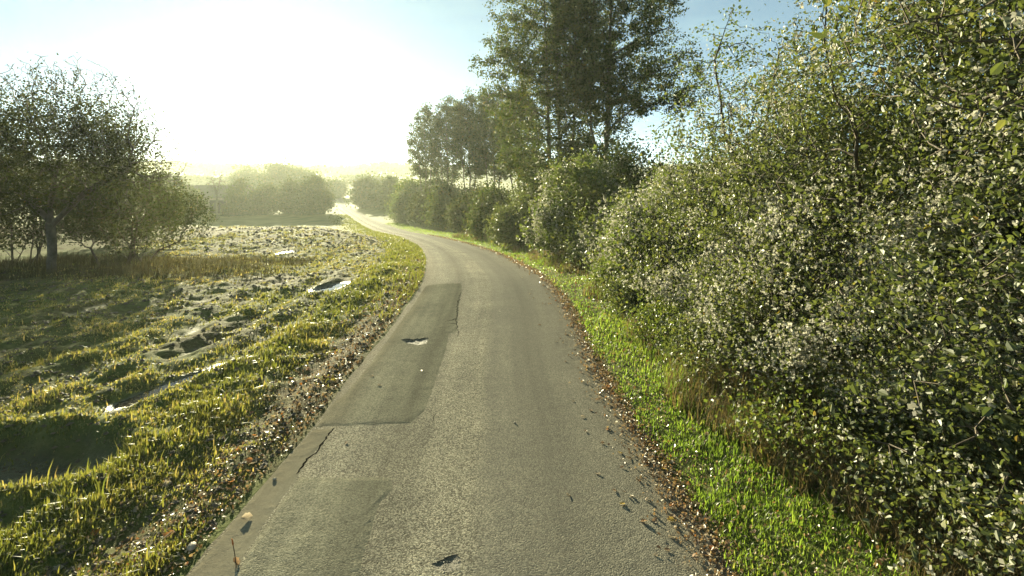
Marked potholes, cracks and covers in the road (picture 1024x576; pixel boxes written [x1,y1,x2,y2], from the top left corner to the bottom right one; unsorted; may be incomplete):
pothole [430,554,461,572]
crack [296,428,334,474]
